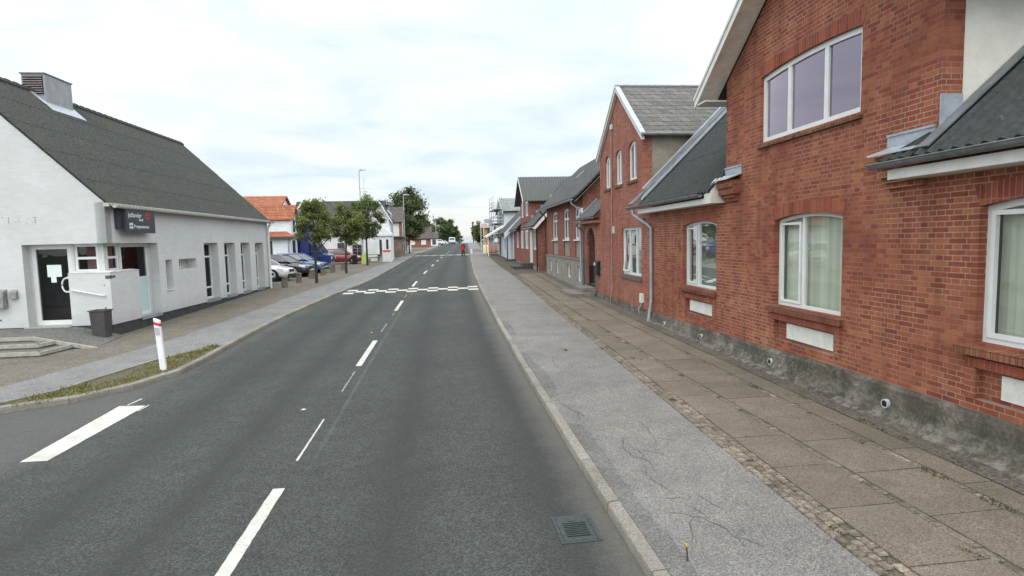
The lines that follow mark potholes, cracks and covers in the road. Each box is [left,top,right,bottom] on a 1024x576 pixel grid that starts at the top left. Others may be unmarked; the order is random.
crack [622,422,763,547]
drain grate [551,514,603,545]
